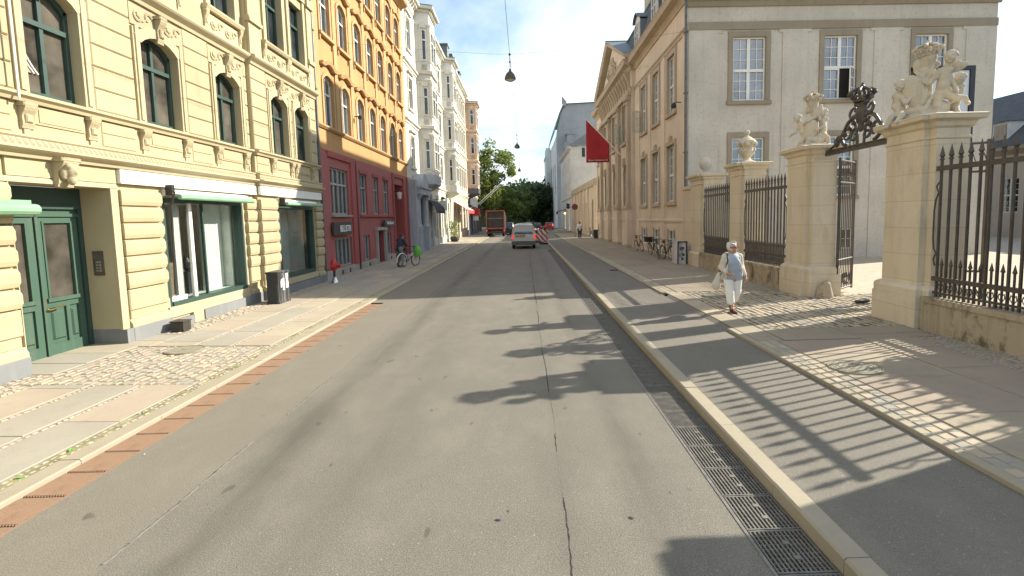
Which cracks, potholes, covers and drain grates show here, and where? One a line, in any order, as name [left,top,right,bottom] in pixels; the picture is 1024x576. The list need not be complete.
drain grate [630,365,663,376]
manhole cover [164,345,206,356]
drain grate [637,374,673,386]
drain grate [624,357,654,366]
manhole cover [826,360,885,375]
drain grate [674,426,726,446]
drain grate [644,385,683,398]
drain grate [687,445,746,469]
drain grate [653,397,694,411]
drain grate [619,350,647,358]
